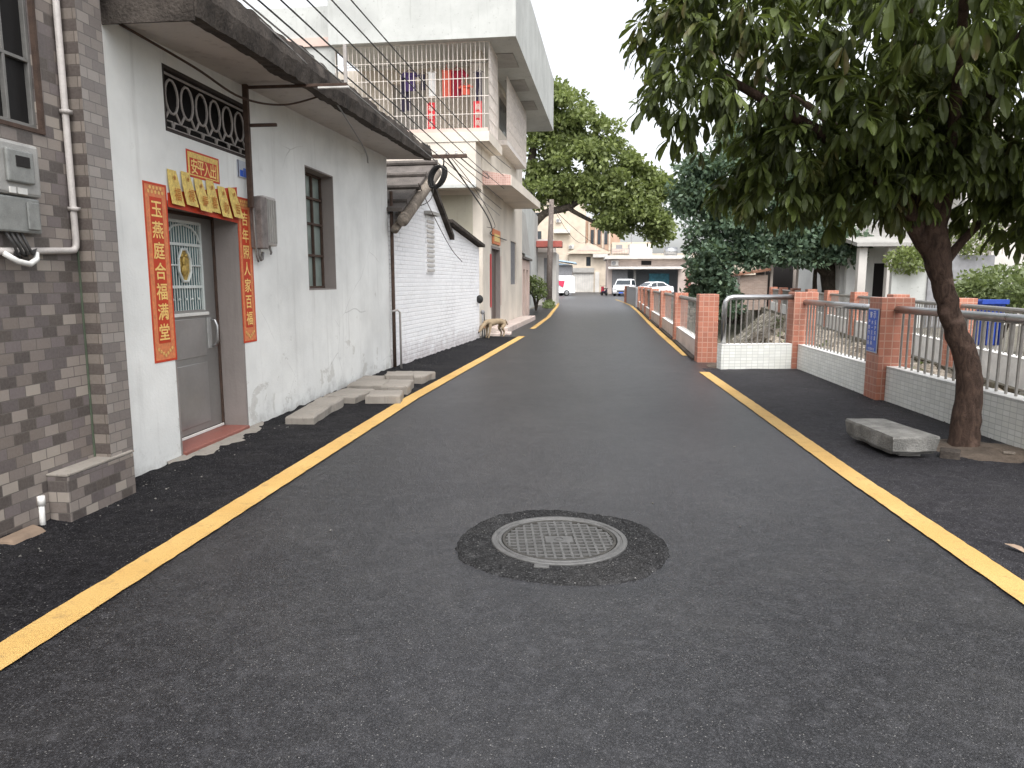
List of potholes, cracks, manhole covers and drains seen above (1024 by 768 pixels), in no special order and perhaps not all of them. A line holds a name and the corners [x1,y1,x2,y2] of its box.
manhole cover [492,516,627,569]
